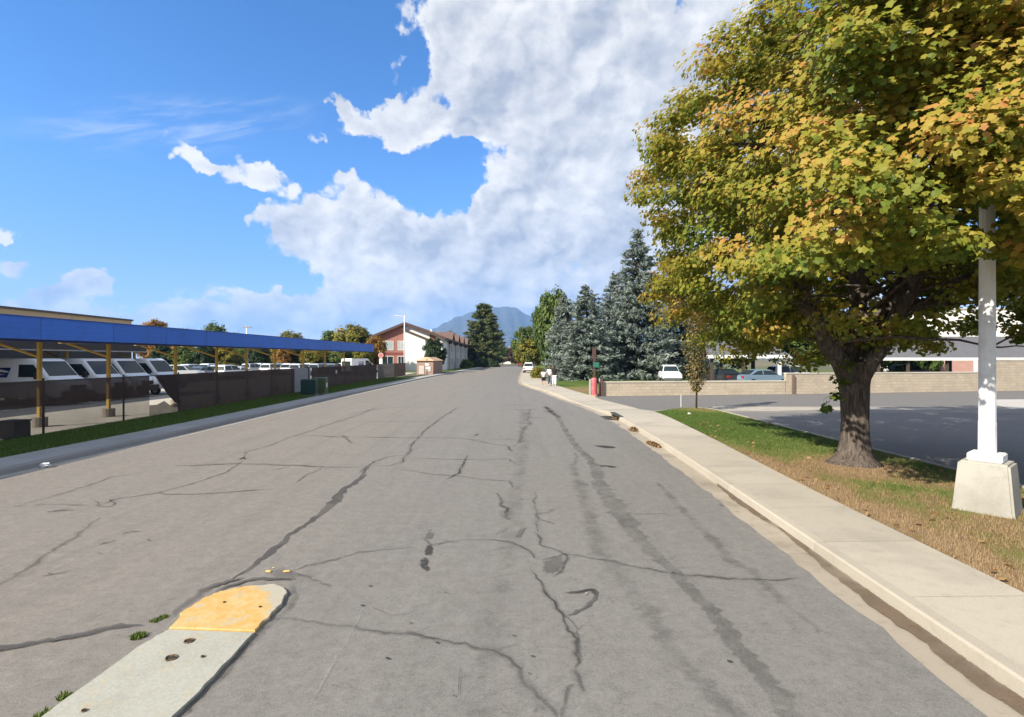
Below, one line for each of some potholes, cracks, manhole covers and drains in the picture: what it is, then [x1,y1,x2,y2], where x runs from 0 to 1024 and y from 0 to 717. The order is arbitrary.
crack [109,457,317,504]
crack [447,522,664,686]
crack [371,630,554,713]
crack [329,409,511,479]
